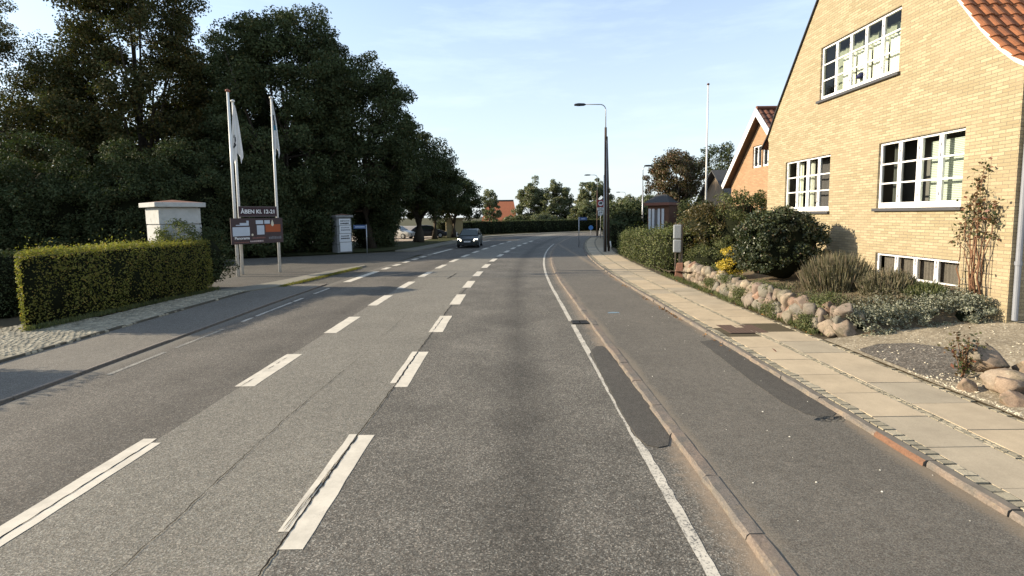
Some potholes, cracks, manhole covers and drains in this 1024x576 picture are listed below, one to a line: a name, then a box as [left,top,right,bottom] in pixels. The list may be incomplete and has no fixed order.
manhole cover [714,324,776,334]
